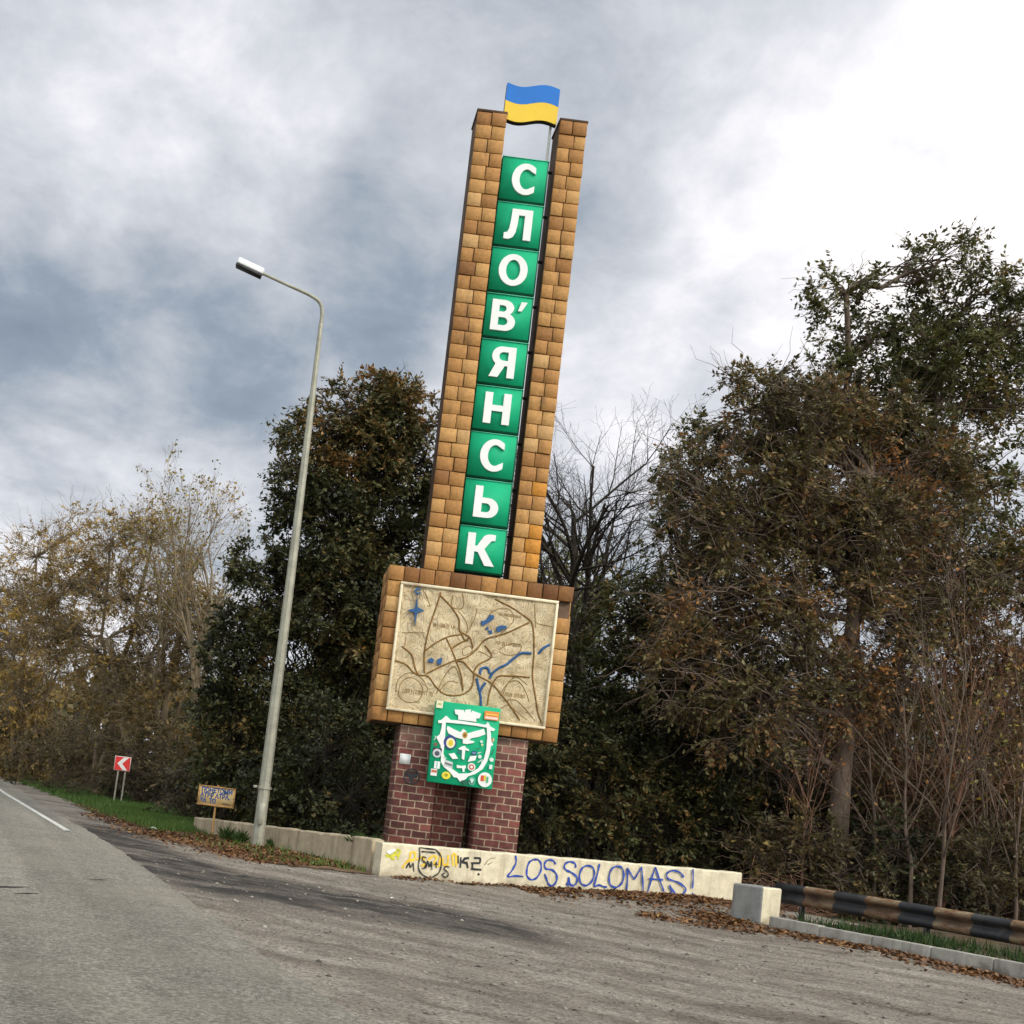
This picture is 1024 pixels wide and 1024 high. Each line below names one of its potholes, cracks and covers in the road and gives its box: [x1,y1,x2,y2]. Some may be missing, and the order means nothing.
crack [0,886,39,894]
